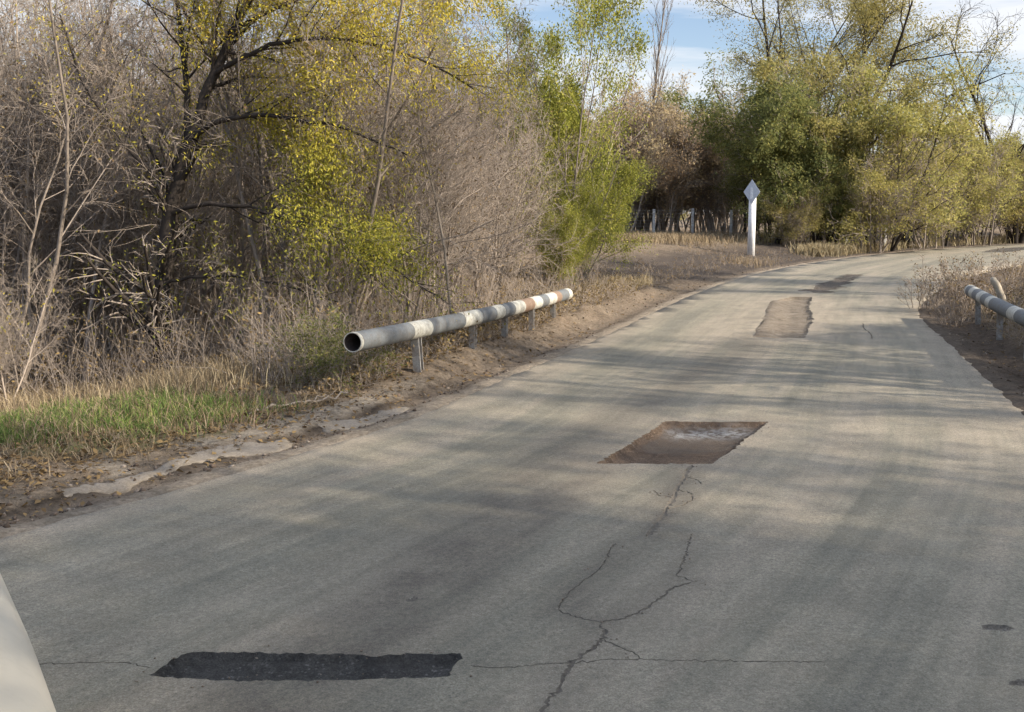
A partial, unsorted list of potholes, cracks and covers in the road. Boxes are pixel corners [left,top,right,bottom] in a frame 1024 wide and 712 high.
crack [470,465,821,712]
pothole [597,421,768,464]
